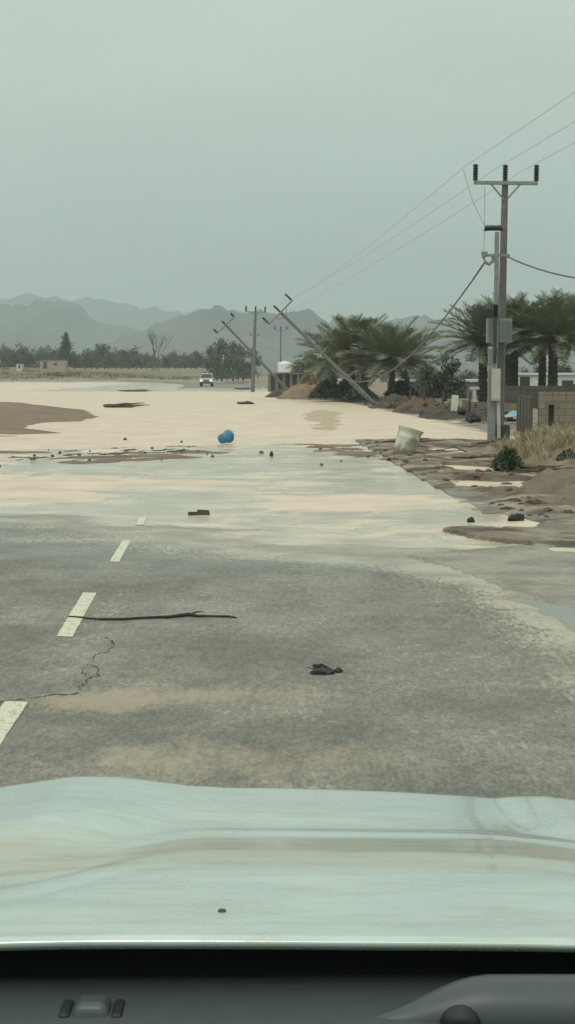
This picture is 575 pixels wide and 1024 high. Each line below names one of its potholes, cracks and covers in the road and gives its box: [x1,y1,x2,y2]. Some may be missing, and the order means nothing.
crack [0,635,121,703]
